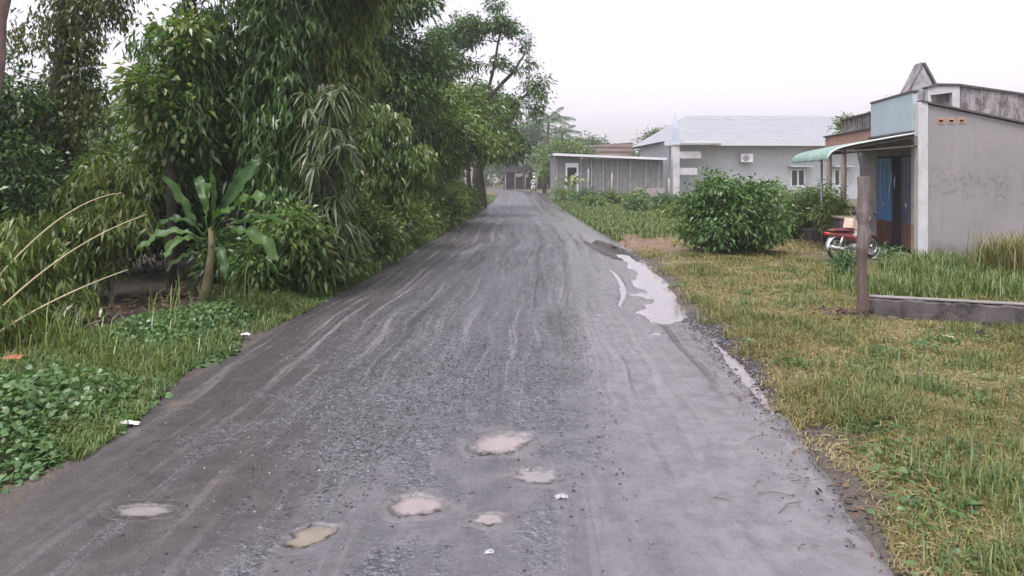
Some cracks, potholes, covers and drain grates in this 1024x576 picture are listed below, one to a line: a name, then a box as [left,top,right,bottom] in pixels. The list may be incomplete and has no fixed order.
pothole [458,508,516,531]
pothole [454,427,546,460]
pothole [268,518,352,555]
pothole [499,464,575,489]
pothole [606,267,629,308]
pothole [98,500,191,522]
pothole [374,489,463,523]
